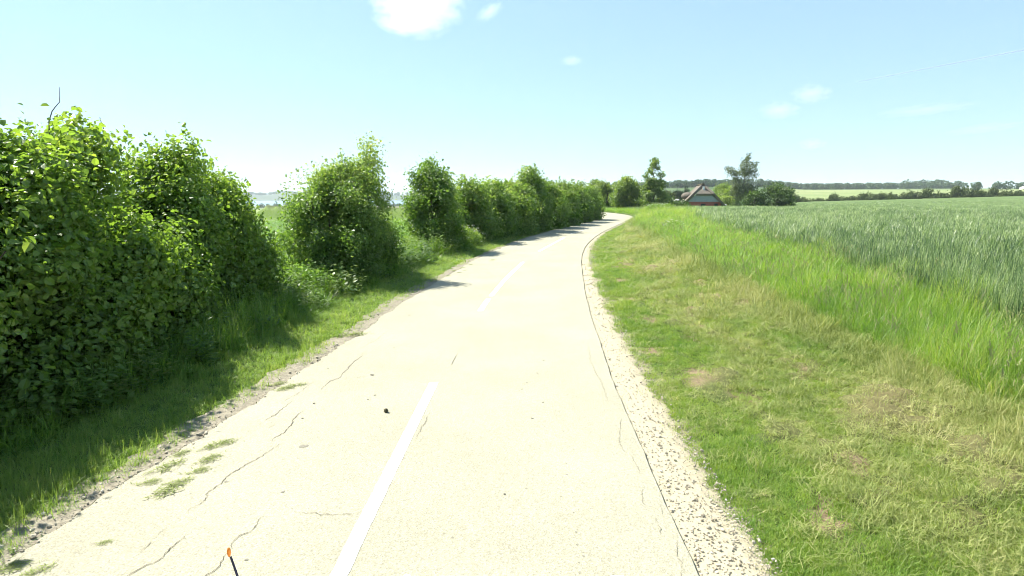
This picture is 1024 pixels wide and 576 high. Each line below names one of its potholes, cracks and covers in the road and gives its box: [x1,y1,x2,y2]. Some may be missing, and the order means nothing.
crack [188,360,356,511]
